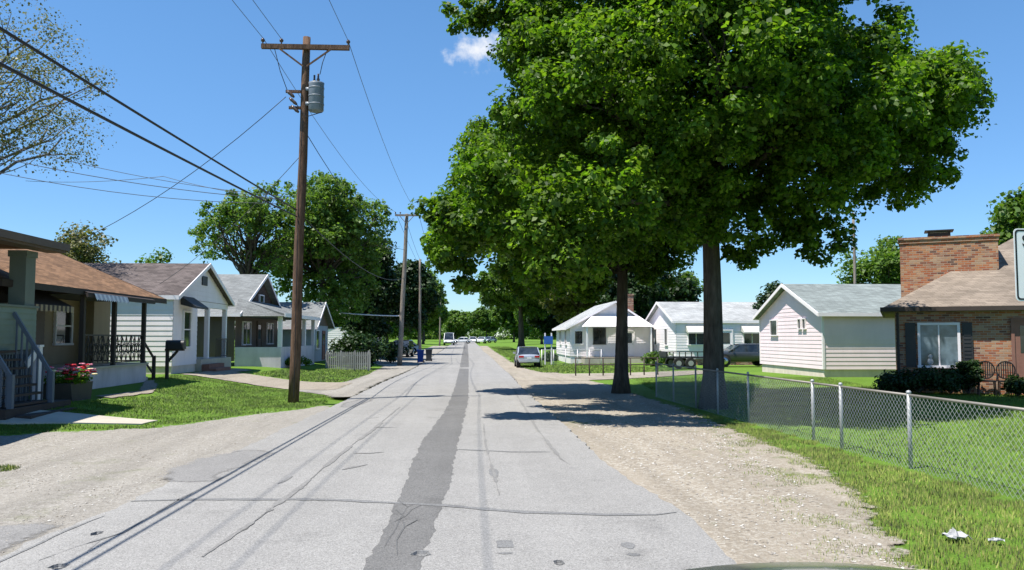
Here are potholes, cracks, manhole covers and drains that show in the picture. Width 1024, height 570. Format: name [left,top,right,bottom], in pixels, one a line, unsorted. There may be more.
crack [0,388,674,562]
